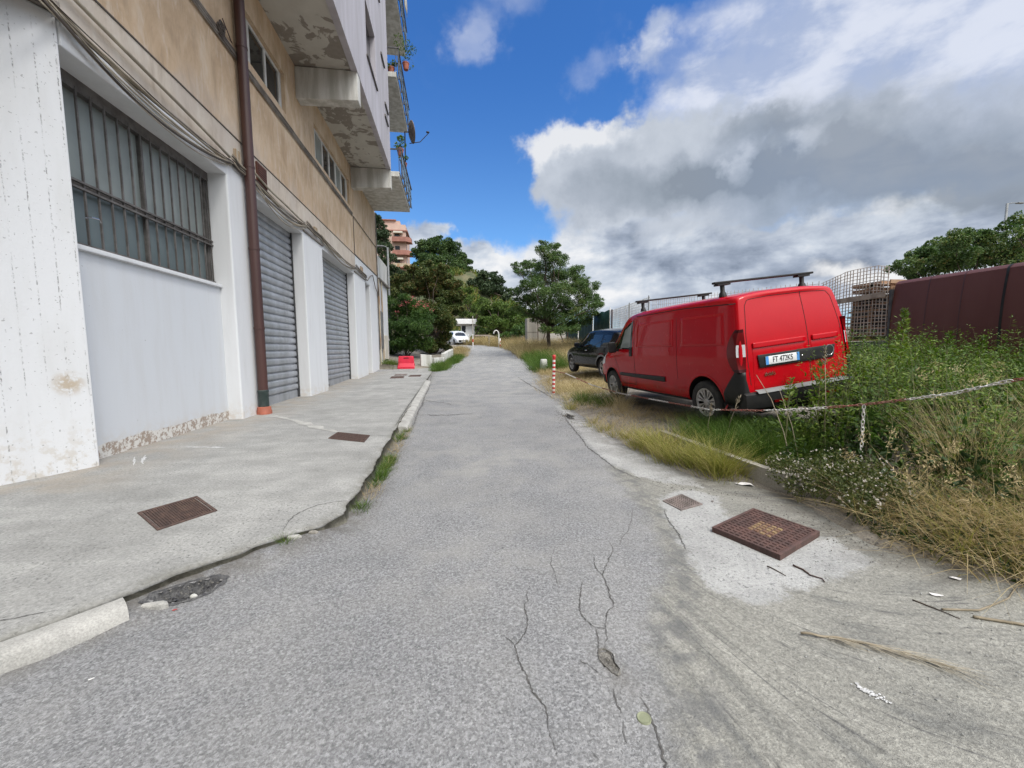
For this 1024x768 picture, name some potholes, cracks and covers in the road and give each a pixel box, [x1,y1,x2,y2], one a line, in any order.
crack [505,569,557,754]
crack [642,699,667,768]
crack [579,510,633,742]
pothole [138,574,230,606]
